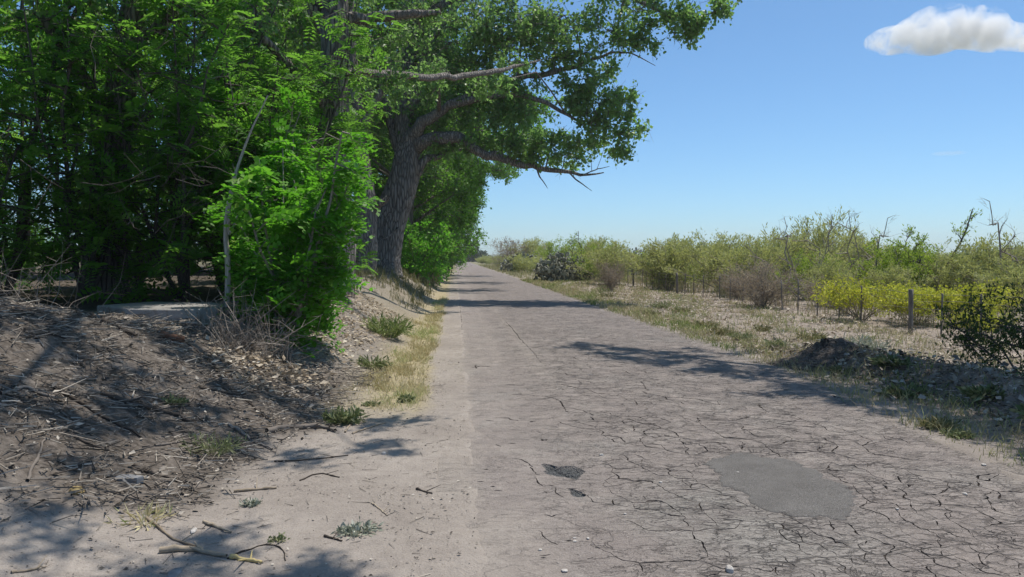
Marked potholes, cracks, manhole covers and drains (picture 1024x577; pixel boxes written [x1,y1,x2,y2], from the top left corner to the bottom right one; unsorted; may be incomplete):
pothole [541,464,585,480]
crack [475,357,1022,577]
